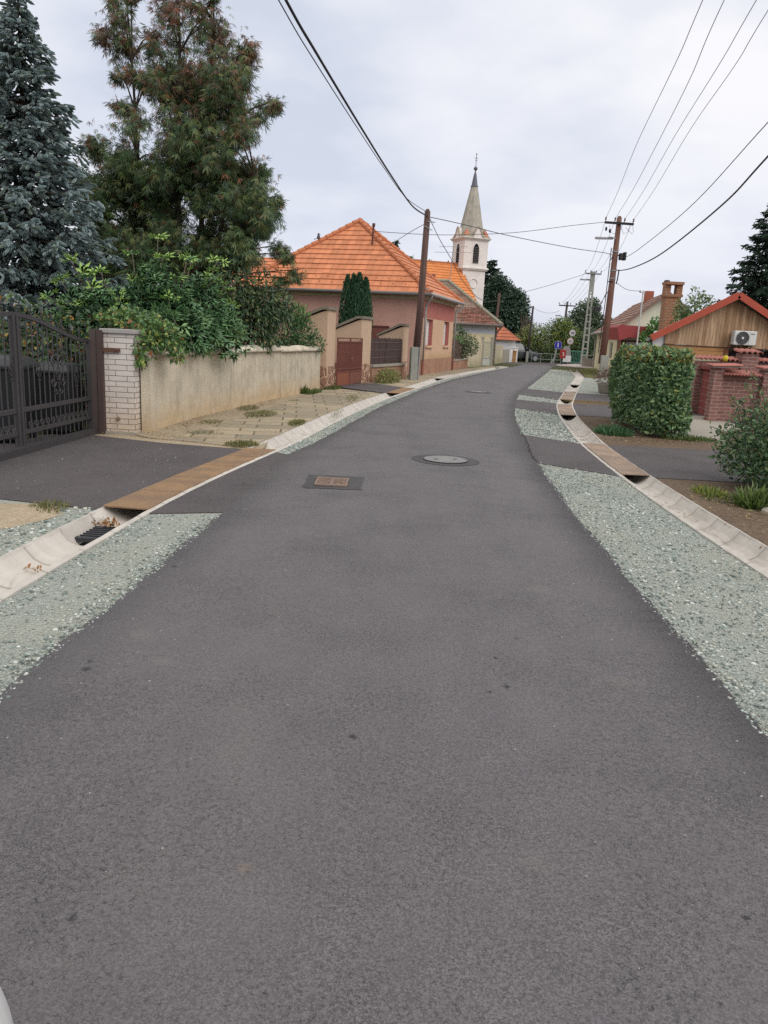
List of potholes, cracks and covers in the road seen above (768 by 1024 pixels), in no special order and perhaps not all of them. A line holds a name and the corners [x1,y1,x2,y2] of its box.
drain grate [74,526,114,545]
manhole cover [412,454,480,466]
